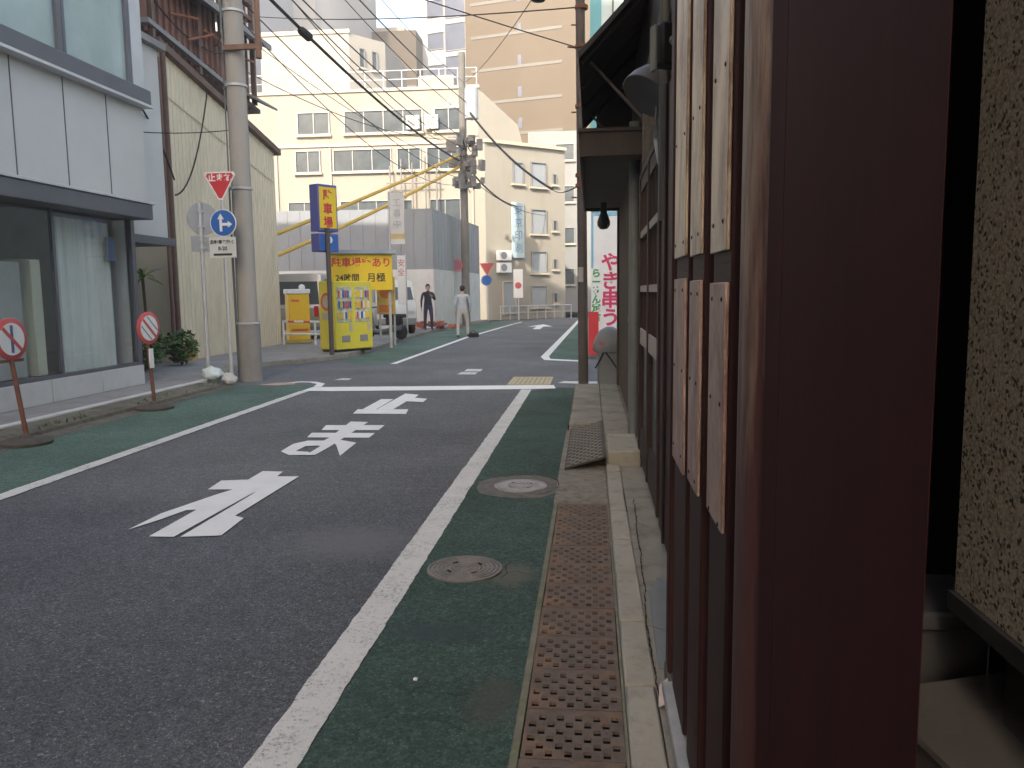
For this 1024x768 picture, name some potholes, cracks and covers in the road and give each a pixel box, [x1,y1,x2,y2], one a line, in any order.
crack [633,500,666,699]
drain grate [520,709,626,766]
manhole cover [477,475,558,498]
drain grate [533,635,619,671]
drain grate [538,607,616,637]
drain grate [549,545,611,564]
drain grate [527,668,622,712]
drain grate [552,530,610,547]
drain grate [554,516,609,530]
drain grate [556,504,608,517]
drain grate [546,563,613,585]
drain grate [517,759,626,768]
